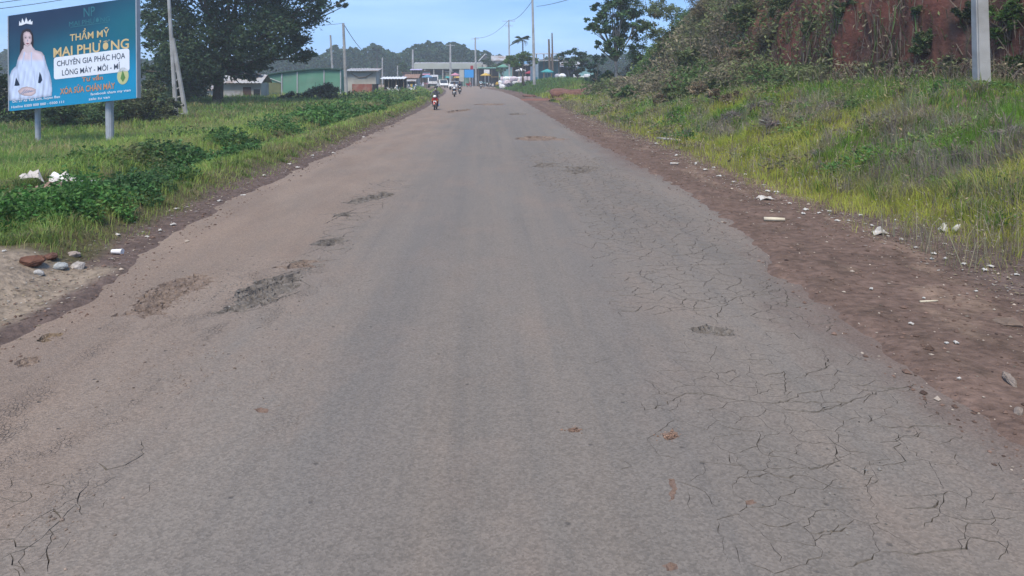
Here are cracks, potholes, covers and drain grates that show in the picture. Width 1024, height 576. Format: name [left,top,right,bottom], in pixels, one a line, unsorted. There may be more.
pothole [210,270,303,315]
pothole [343,192,394,204]
pothole [561,166,603,174]
pothole [111,273,216,319]
crack [0,441,157,576]
pothole [14,356,41,368]
pothole [37,333,64,343]
pothole [687,325,735,337]
crack [589,339,1024,574]
